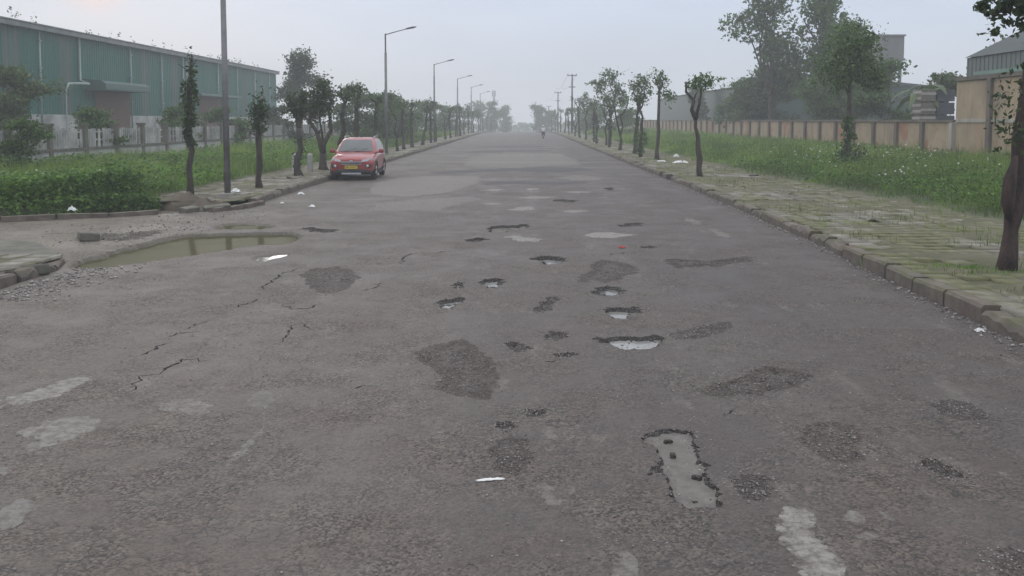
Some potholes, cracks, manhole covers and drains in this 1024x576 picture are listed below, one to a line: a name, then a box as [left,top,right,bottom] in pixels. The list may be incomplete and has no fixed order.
pothole [530,255,567,265]
pothole [641,429,723,509]
pothole [479,278,506,289]
pothole [602,306,644,319]
pothole [592,335,666,350]
crack [129,322,208,392]
crack [234,267,301,308]
pothole [591,286,627,296]
crack [277,305,315,344]
pothole [487,224,530,232]
pothole [436,296,466,309]
